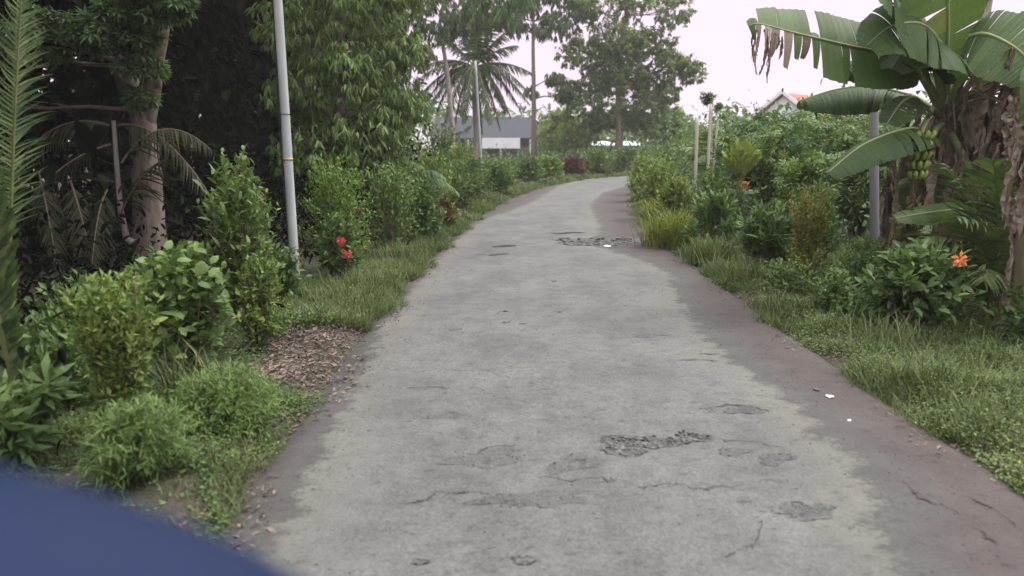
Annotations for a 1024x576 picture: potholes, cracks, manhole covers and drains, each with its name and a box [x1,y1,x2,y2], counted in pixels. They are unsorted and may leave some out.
pothole [759,453,798,467]
crack [726,516,763,557]
pothole [593,434,681,458]
pothole [771,503,838,521]
crack [402,490,489,504]
pothole [546,237,648,247]
crack [638,482,740,491]
pothole [724,406,768,414]
pothole [435,447,522,470]
pothole [668,429,714,445]
